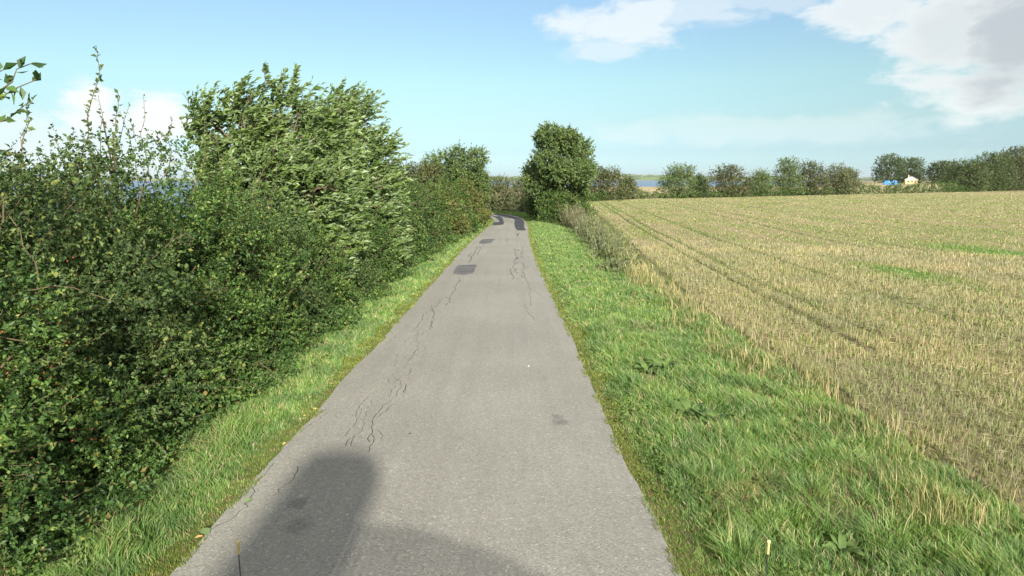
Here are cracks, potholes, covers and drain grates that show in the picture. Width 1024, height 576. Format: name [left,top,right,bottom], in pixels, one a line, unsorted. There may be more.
crack [506,233,535,319]
crack [345,279,460,451]
crack [212,466,298,529]
